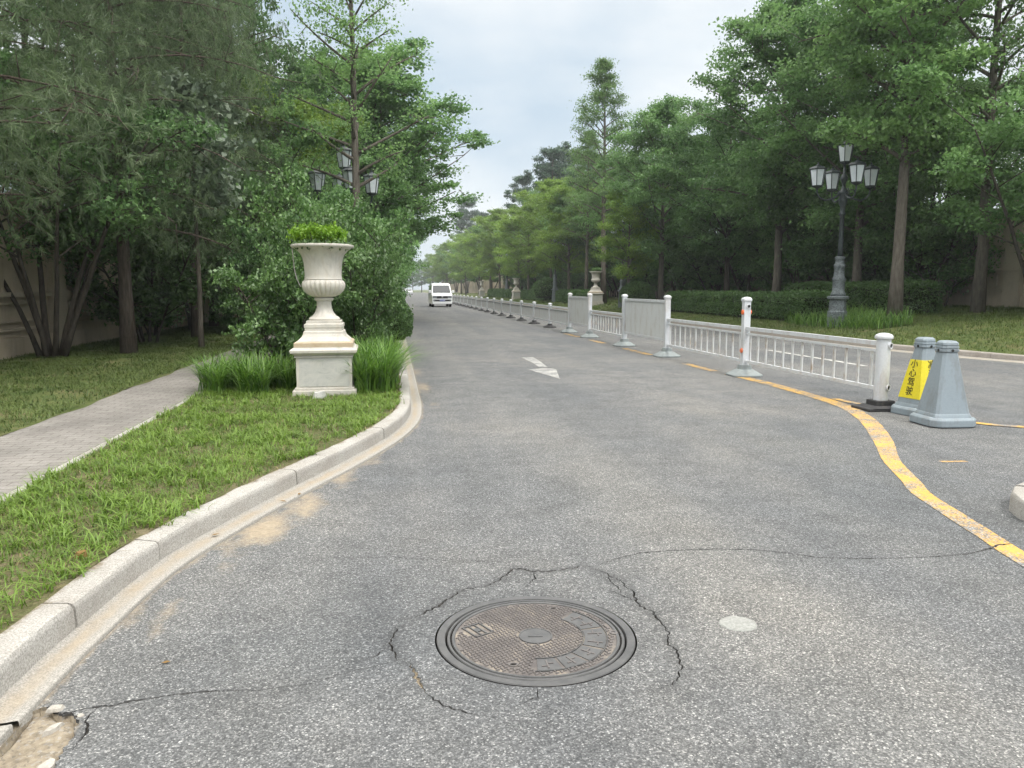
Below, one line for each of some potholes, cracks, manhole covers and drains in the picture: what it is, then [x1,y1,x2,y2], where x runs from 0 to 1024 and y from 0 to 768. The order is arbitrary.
crack [600,544,1006,565]
pothole [0,706,79,768]
manhole cover [435,596,637,687]
crack [62,556,683,750]
